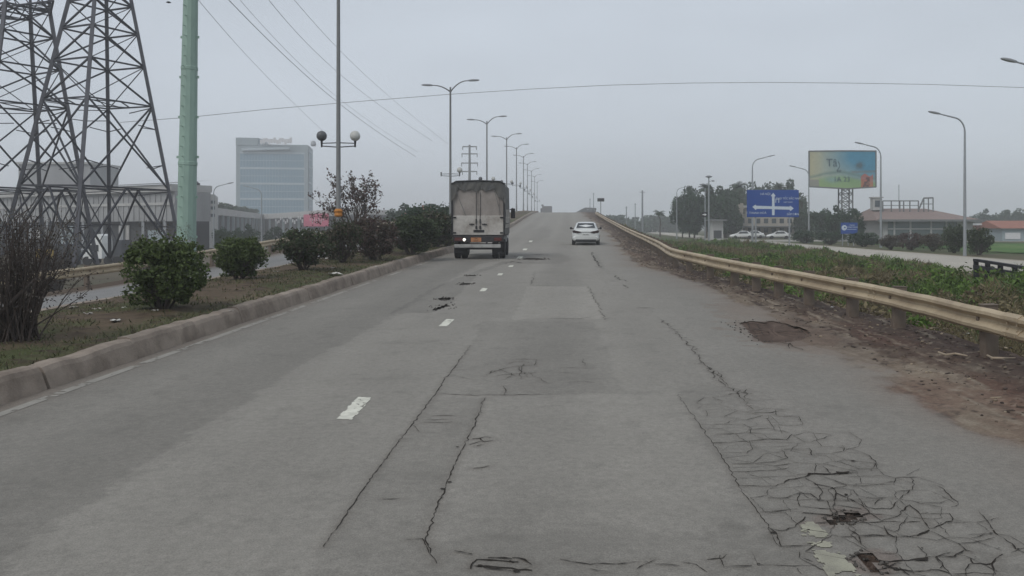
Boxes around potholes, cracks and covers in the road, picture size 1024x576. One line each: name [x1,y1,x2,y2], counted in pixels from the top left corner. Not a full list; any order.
crack [677,395,1023,576]
crack [459,551,532,572]
crack [442,359,547,395]
crack [662,321,753,409]
pothole [721,319,820,345]
